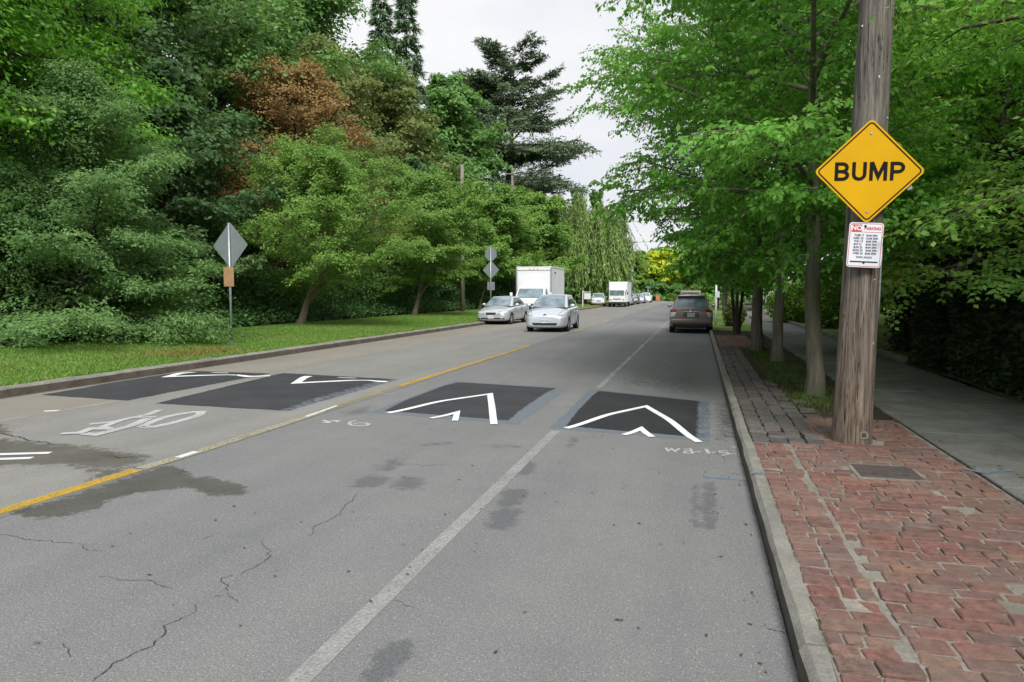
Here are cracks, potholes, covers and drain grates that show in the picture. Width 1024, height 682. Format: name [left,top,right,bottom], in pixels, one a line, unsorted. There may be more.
utility cover [848,463,931,483]
crack [92,604,197,682]
crack [219,541,271,601]
